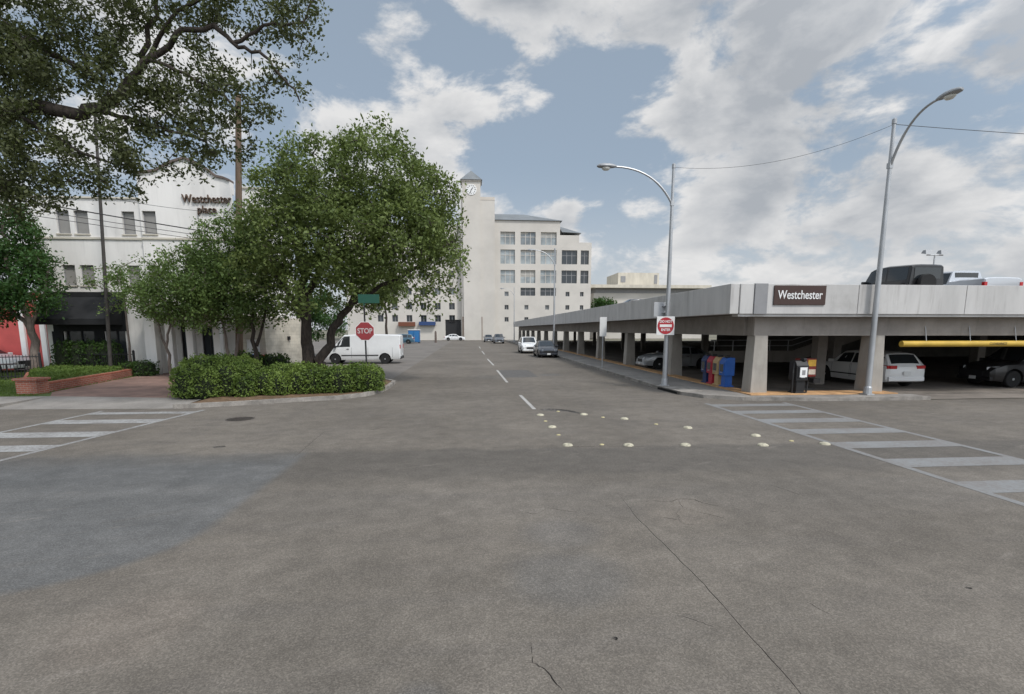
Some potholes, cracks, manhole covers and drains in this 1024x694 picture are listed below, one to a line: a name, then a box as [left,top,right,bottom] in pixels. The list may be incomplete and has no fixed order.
crack [522,647,561,688]
crack [624,499,801,694]
